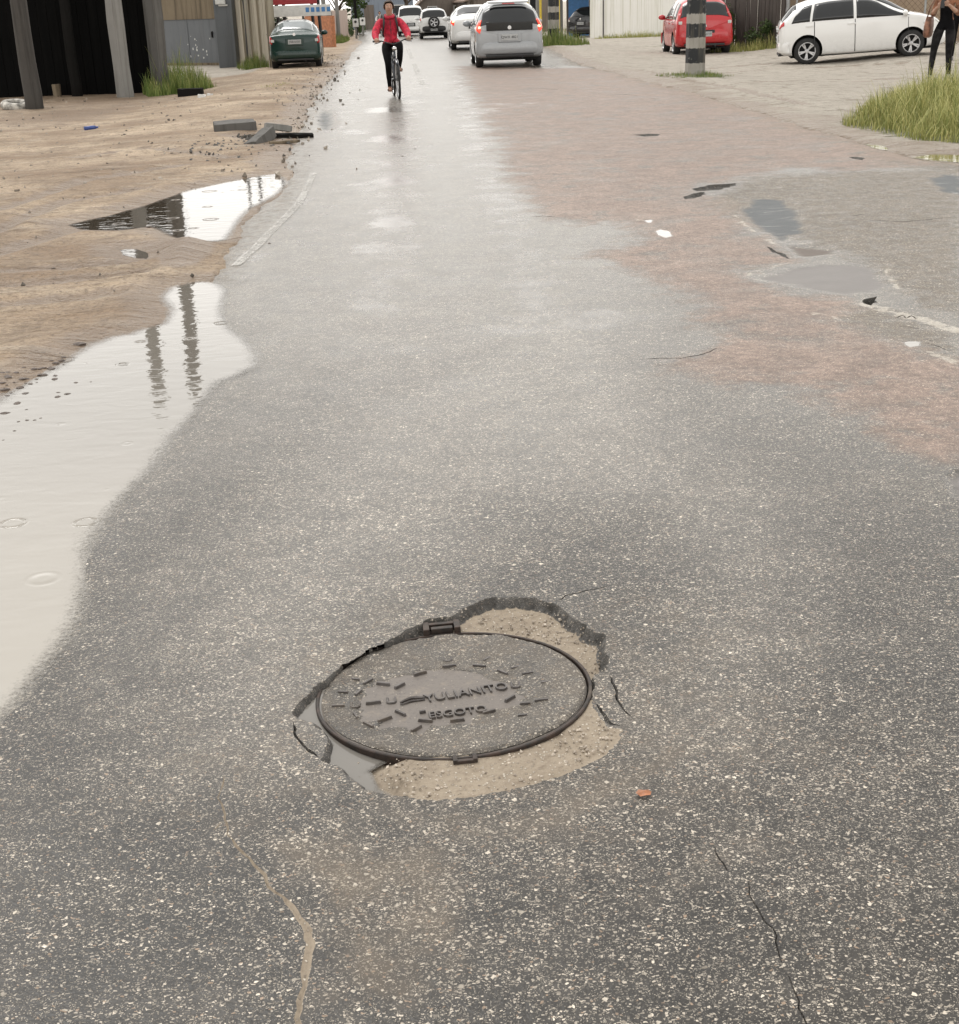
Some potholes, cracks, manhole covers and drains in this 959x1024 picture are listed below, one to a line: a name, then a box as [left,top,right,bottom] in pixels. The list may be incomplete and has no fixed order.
manhole cover [315,619,592,766]
pothole [745,262,897,296]
pothole [693,183,736,191]
pothole [919,173,959,196]
crack [715,849,807,1024]
crack [214,778,316,1024]
crack [595,675,632,727]
pothole [732,197,816,244]
